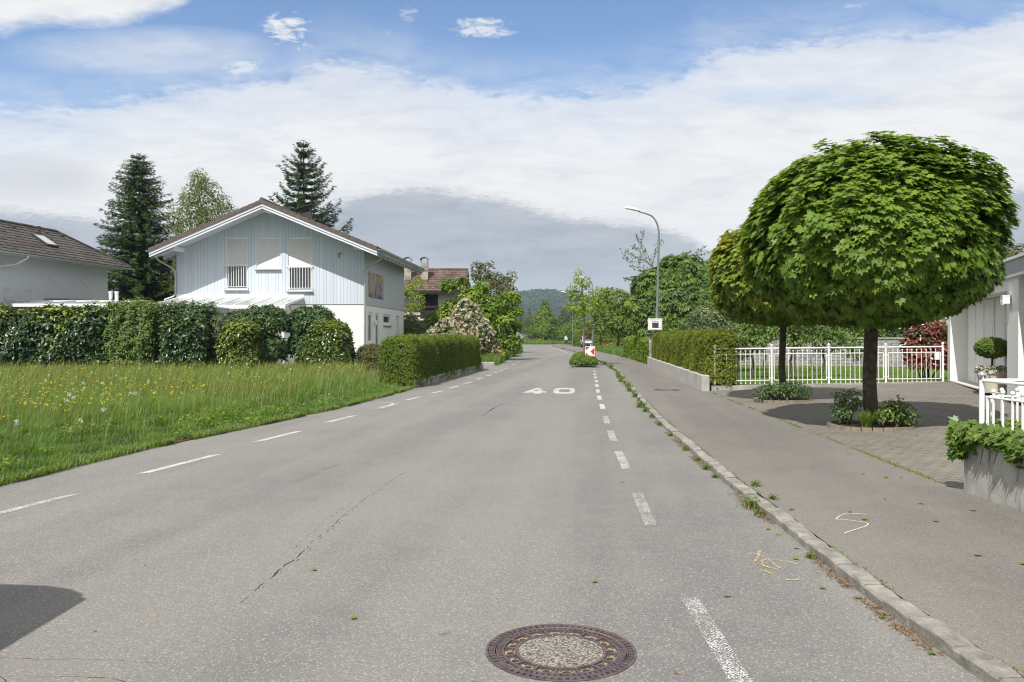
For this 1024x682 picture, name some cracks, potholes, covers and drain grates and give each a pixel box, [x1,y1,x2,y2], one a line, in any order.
crack [240,471,408,603]
crack [0,657,152,682]
manhole cover [485,624,637,682]
